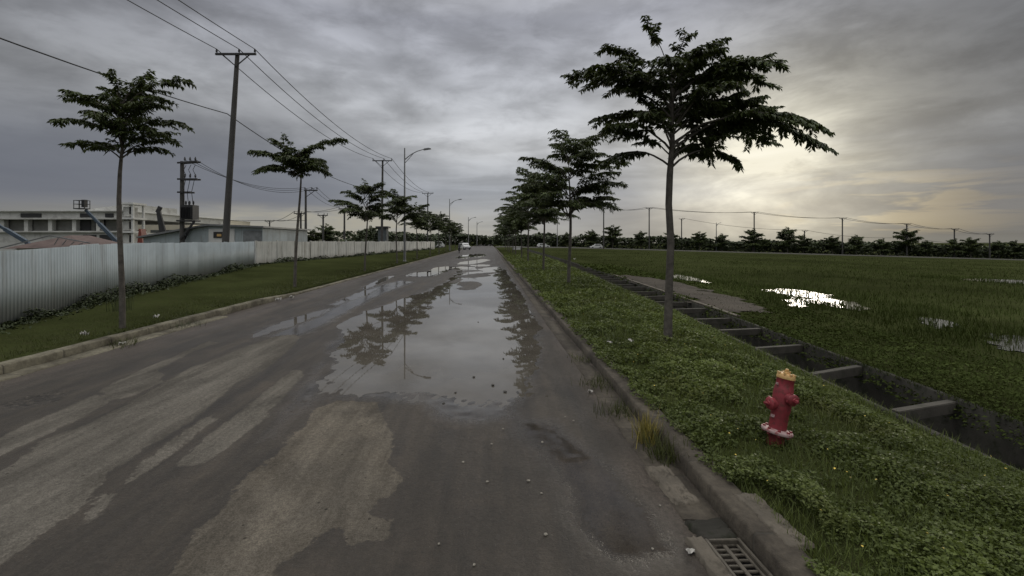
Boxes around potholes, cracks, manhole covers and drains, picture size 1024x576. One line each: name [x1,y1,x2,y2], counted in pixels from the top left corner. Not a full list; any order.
drain grate [704,538,773,576]
